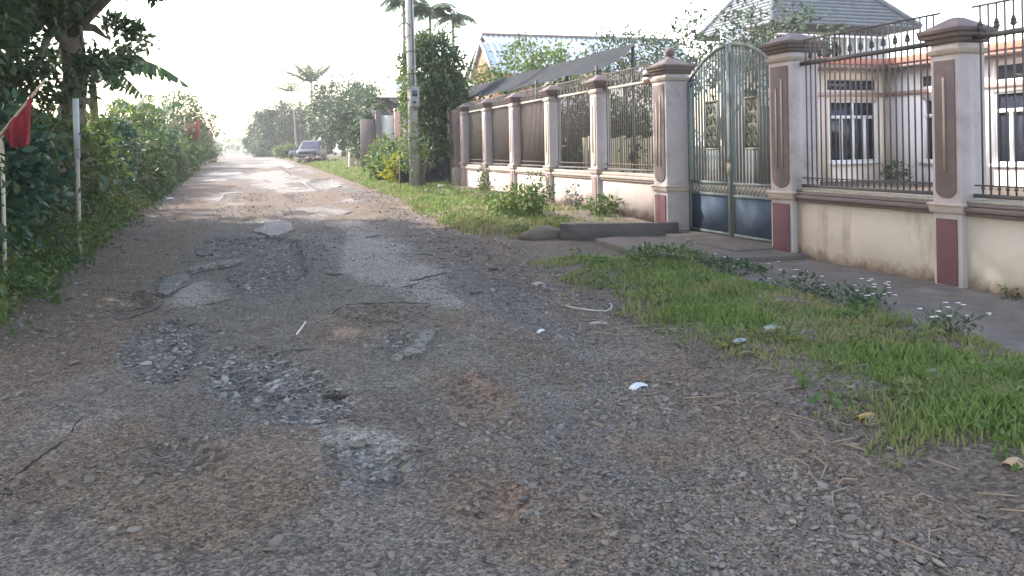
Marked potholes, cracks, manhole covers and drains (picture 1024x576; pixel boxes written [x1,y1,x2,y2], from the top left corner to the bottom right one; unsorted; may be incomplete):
crack [7,416,82,482]
crack [331,254,446,315]
pothole [216,192,270,204]
pothole [197,343,362,429]
pothole [377,328,414,355]
pothole [282,193,316,203]
pothole [317,437,423,499]
pothole [215,205,288,220]
pothole [111,317,228,392]
pothole [305,178,335,192]
pothole [192,236,311,298]
